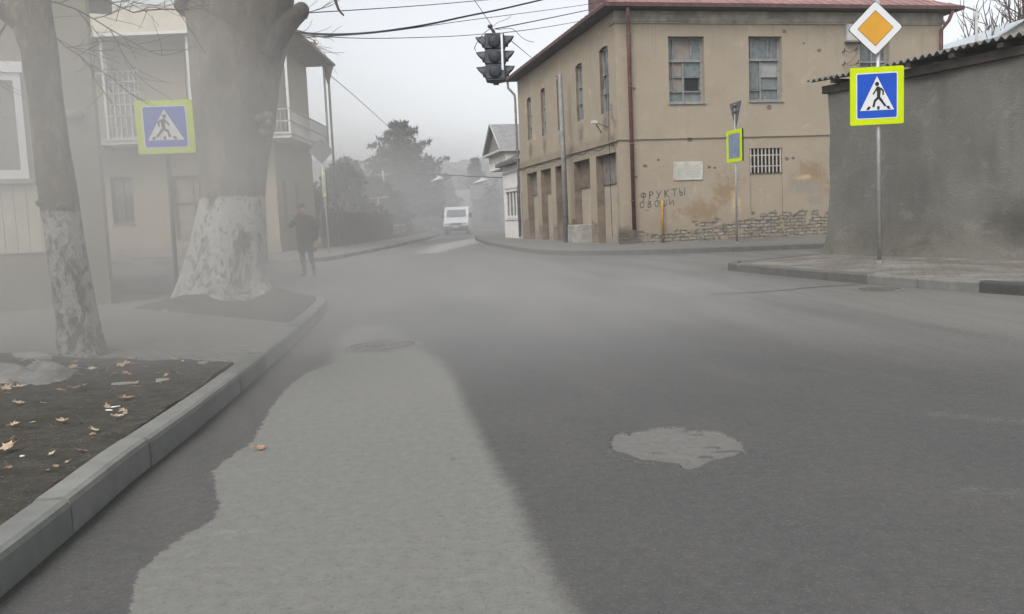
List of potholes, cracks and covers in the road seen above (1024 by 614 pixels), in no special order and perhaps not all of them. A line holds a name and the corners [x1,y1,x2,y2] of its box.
manhole cover [342,340,423,353]
